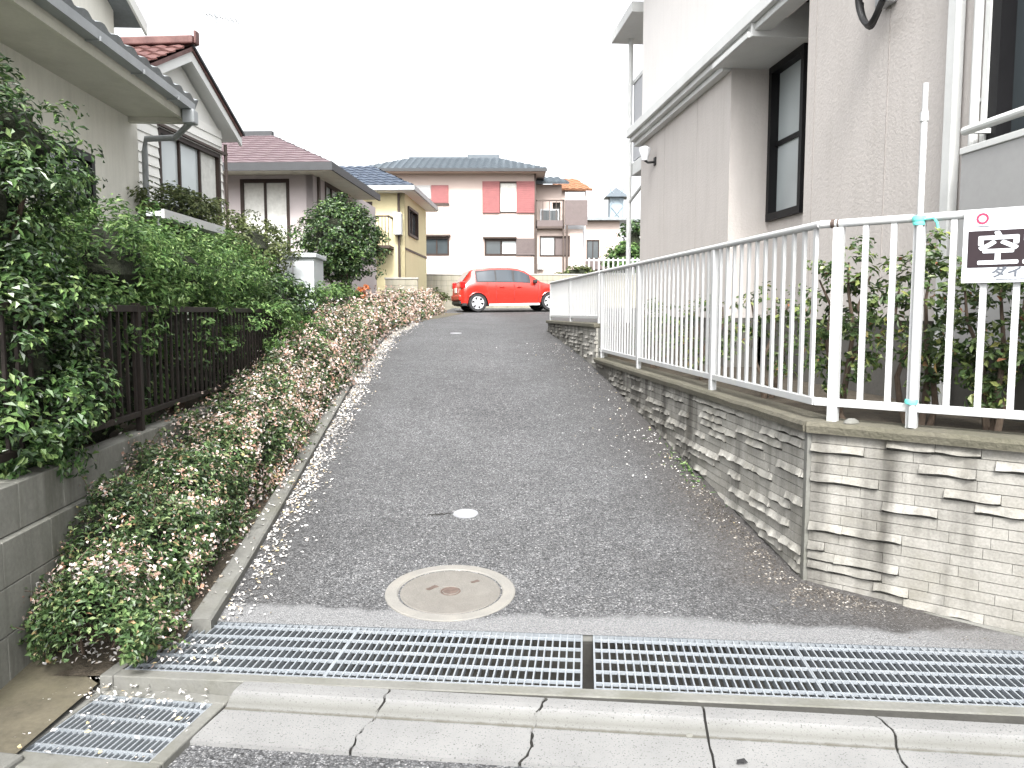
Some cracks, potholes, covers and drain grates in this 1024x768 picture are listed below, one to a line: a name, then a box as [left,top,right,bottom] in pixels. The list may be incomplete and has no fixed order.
crack [349,690,391,755]
drain grate [125,621,359,678]
crack [877,717,908,768]
crack [703,709,716,768]
crack [518,699,548,766]
drain grate [793,642,1024,707]
manhole cover [385,565,515,622]
drain grate [593,635,828,699]
drain grate [323,627,583,689]
drain grate [22,695,212,763]
